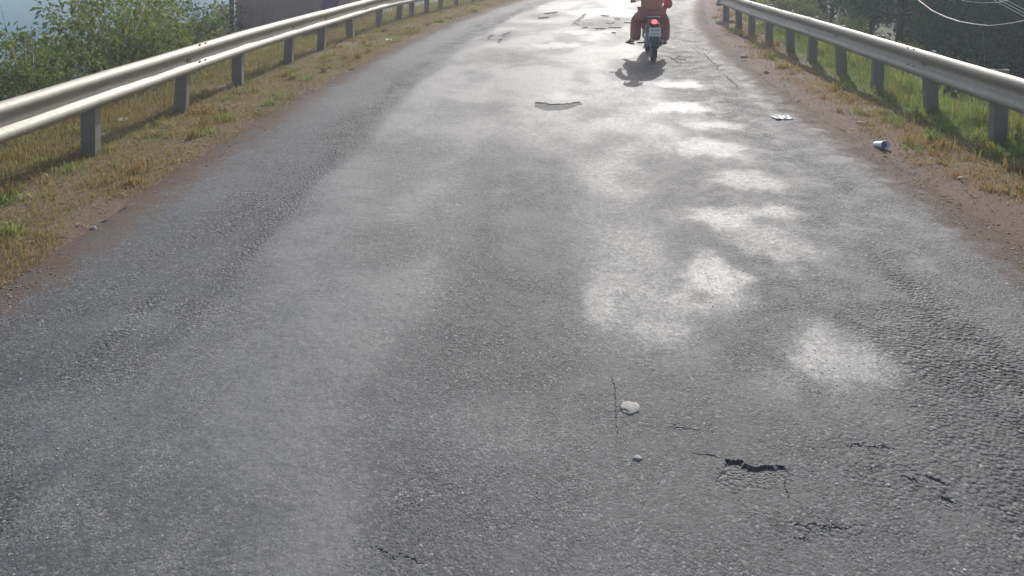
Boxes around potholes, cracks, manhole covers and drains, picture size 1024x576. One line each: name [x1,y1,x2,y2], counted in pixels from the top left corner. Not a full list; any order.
pothole [534,101,582,111]
crack [846,442,922,484]
pothole [583,15,631,34]
crack [788,521,849,543]
crack [668,423,712,431]
crack [661,52,741,90]
crack [369,545,422,564]
crack [611,375,621,442]
